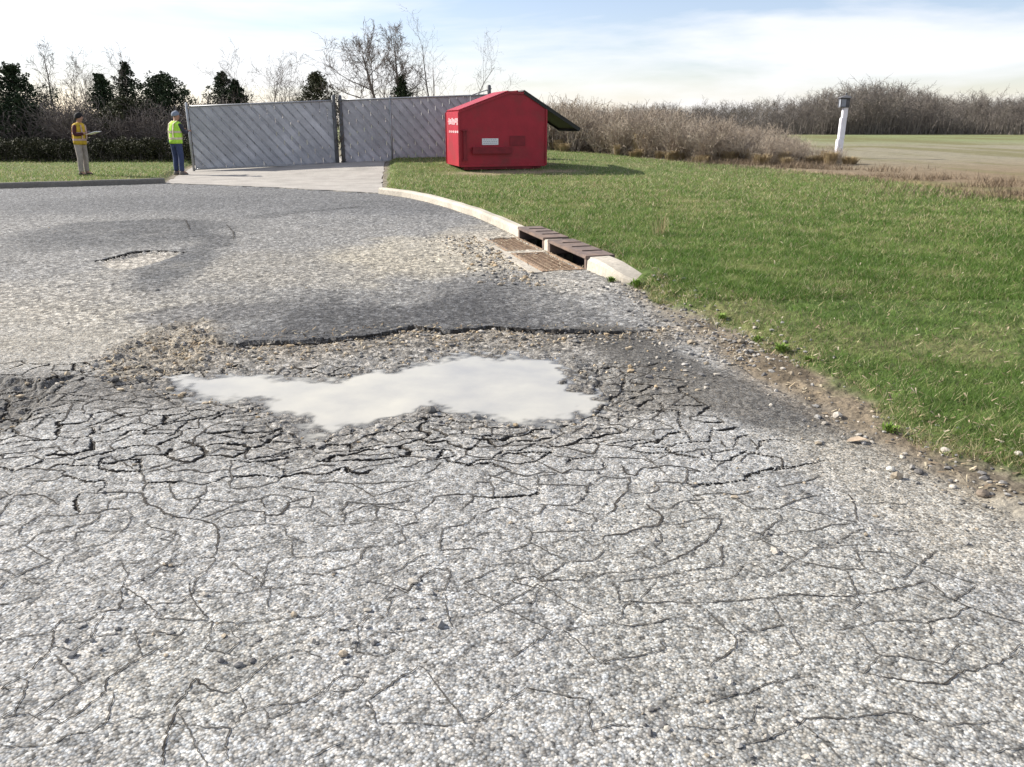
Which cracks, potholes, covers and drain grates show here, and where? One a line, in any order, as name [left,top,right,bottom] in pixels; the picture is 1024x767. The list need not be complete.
crack [0,357,1023,767]
drain grate [475,226,615,274]
pothole [138,347,631,447]
pothole [96,250,183,271]
